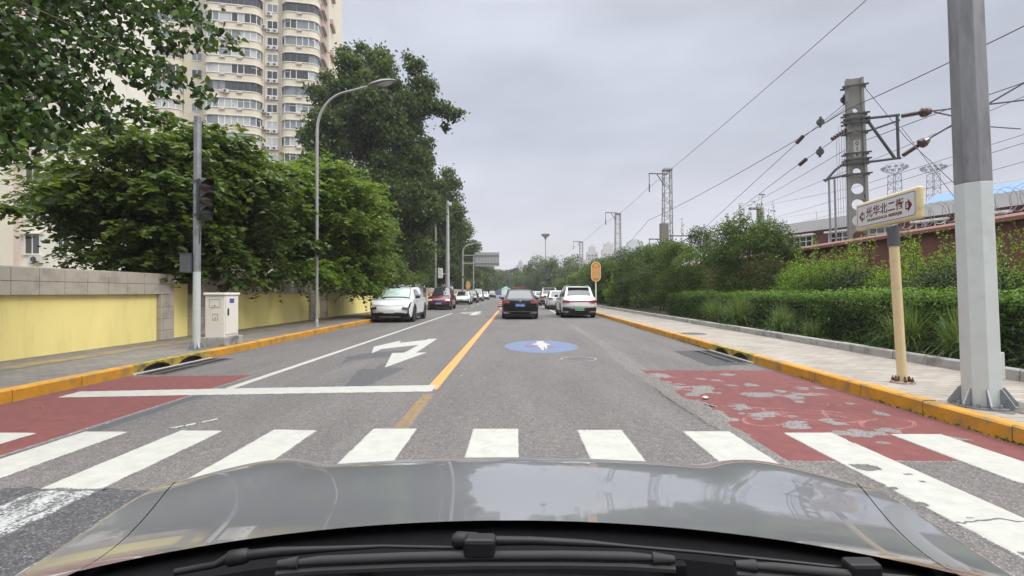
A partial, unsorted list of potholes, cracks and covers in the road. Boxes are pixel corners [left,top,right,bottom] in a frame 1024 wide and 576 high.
drain grate [689,344,759,364]
drain grate [130,351,235,376]
